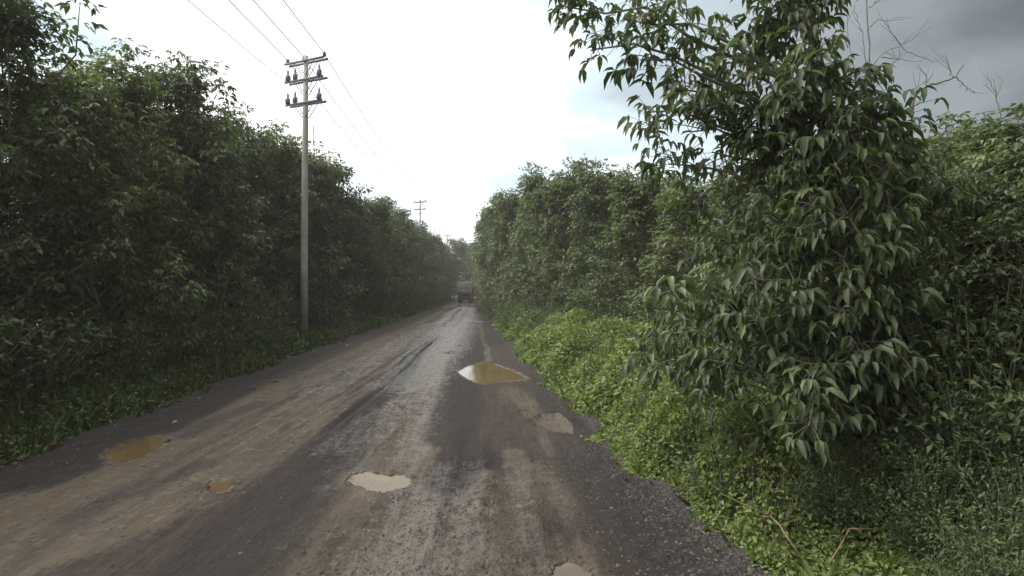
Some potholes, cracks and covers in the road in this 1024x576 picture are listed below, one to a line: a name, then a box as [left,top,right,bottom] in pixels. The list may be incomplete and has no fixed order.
pothole [520,410,585,437]
pothole [328,466,431,498]
pothole [448,362,534,386]
pothole [85,433,182,466]
